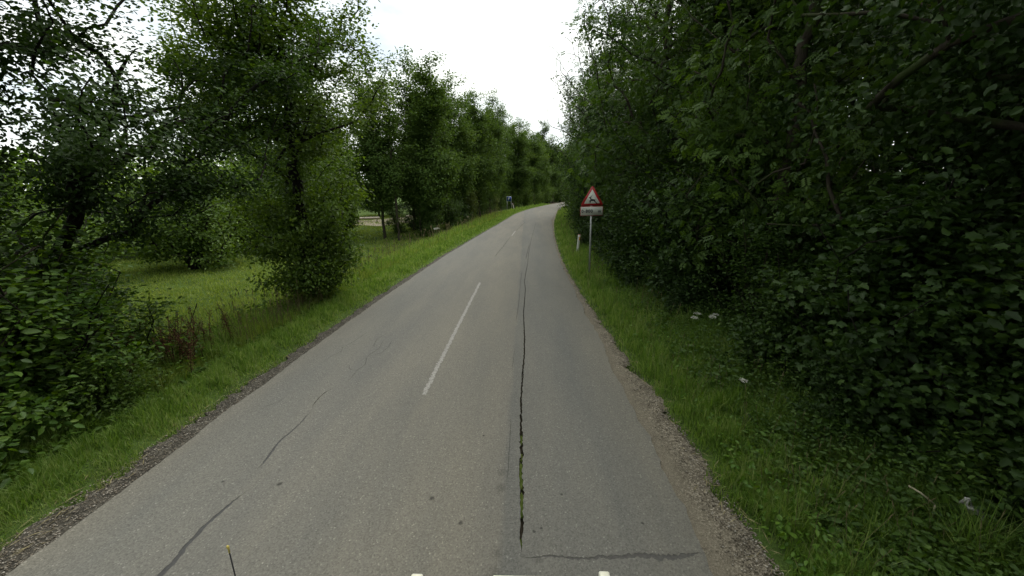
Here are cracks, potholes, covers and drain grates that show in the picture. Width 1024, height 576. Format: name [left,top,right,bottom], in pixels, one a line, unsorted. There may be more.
crack [519,227,698,562]
